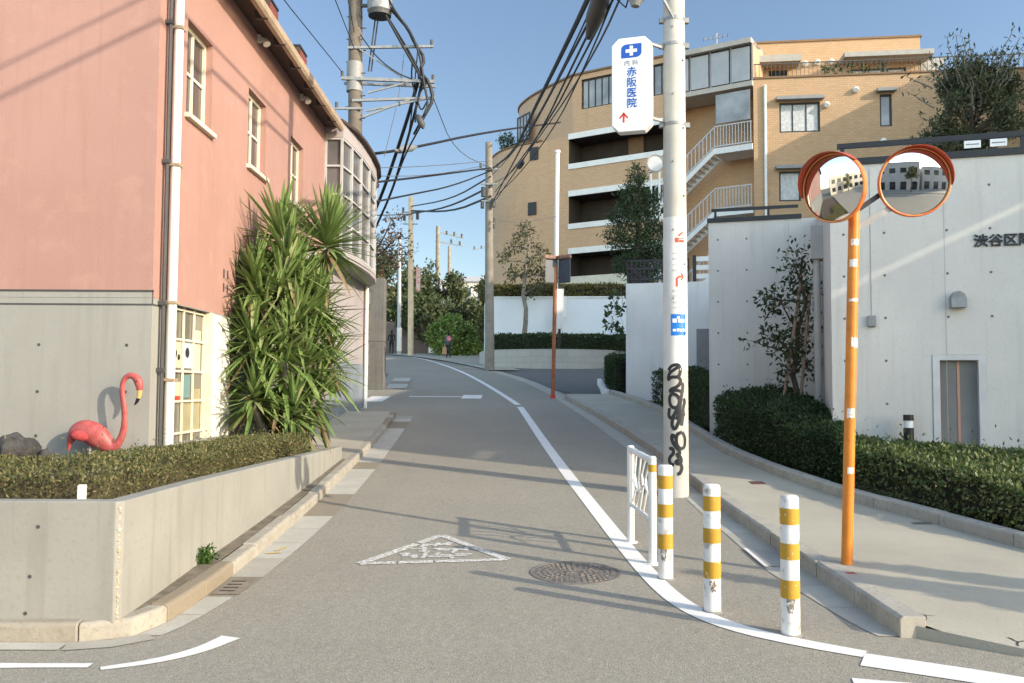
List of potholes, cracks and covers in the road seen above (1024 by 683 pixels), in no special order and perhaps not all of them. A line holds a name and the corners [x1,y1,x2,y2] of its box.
manhole cover [530,561,622,585]
